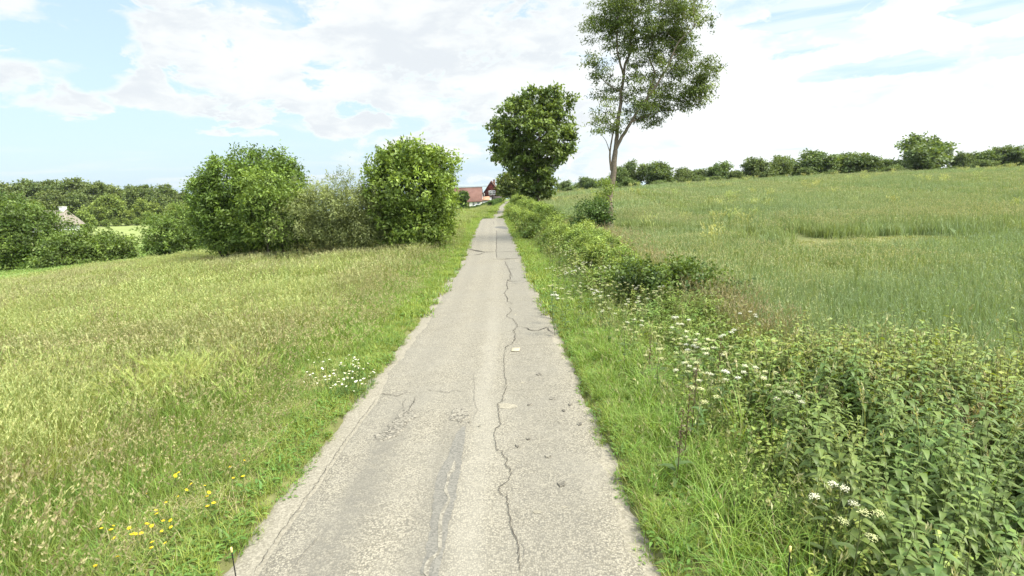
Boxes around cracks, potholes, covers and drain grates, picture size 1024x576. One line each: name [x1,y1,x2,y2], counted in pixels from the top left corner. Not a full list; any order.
pothole [373,428,401,441]
pothole [387,418,407,432]
pothole [449,408,471,423]
crack [494,356,525,571]
crack [470,249,555,348]
pothole [395,410,417,422]
